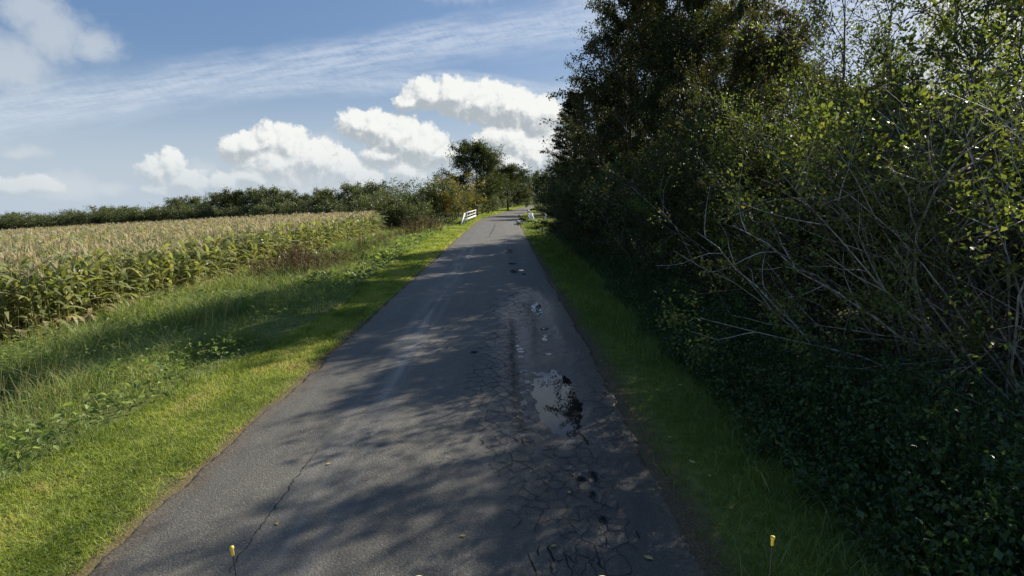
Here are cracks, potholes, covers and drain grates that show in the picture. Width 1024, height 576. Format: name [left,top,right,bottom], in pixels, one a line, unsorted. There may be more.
crack [463,291,640,576]
crack [228,447,318,575]
